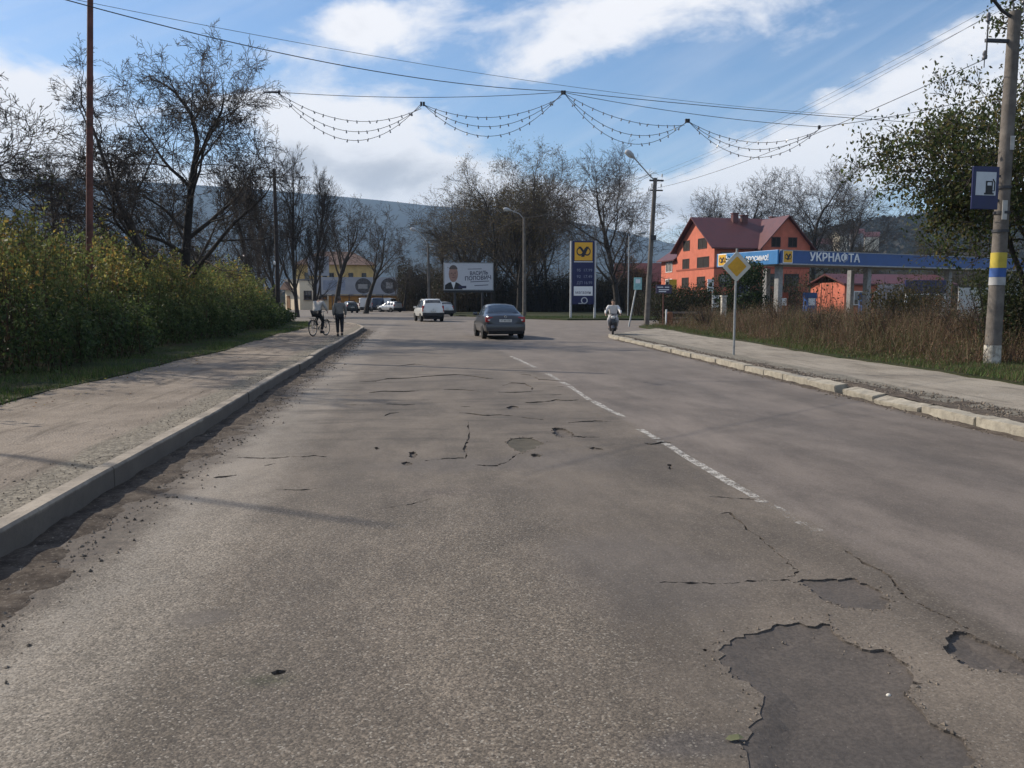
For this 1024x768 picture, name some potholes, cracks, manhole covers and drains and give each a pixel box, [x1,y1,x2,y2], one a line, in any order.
crack [845,551,970,630]
crack [660,496,799,585]
pothole [553,428,574,438]
crack [365,364,574,466]
pothole [799,577,891,610]
pothole [507,438,544,452]
pothole [718,622,977,768]
pothole [943,631,1024,676]
